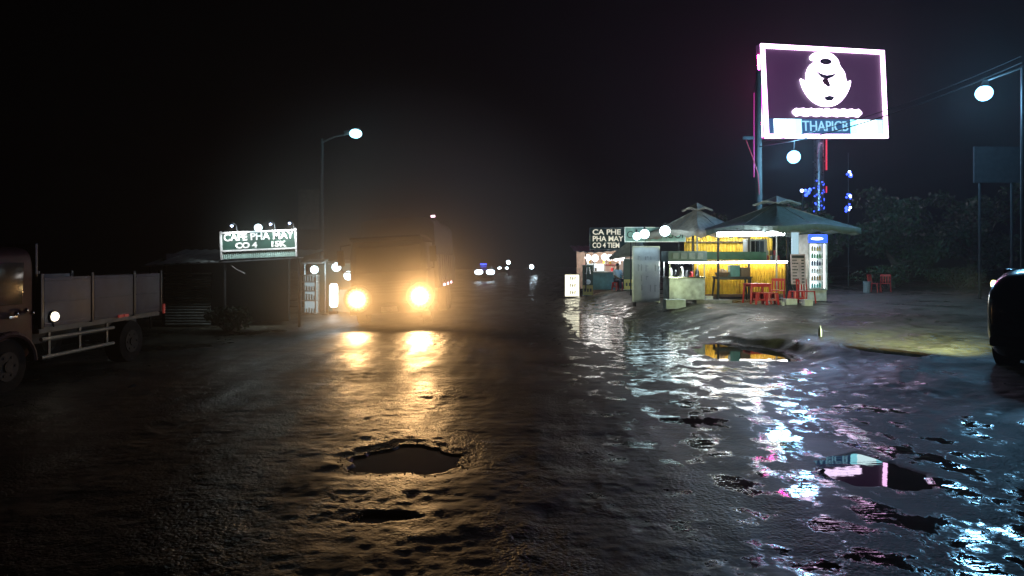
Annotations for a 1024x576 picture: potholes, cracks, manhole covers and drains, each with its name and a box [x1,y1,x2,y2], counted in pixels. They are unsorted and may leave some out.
pothole [688,341,808,363]
pothole [345,512,419,524]
pothole [337,441,476,478]
